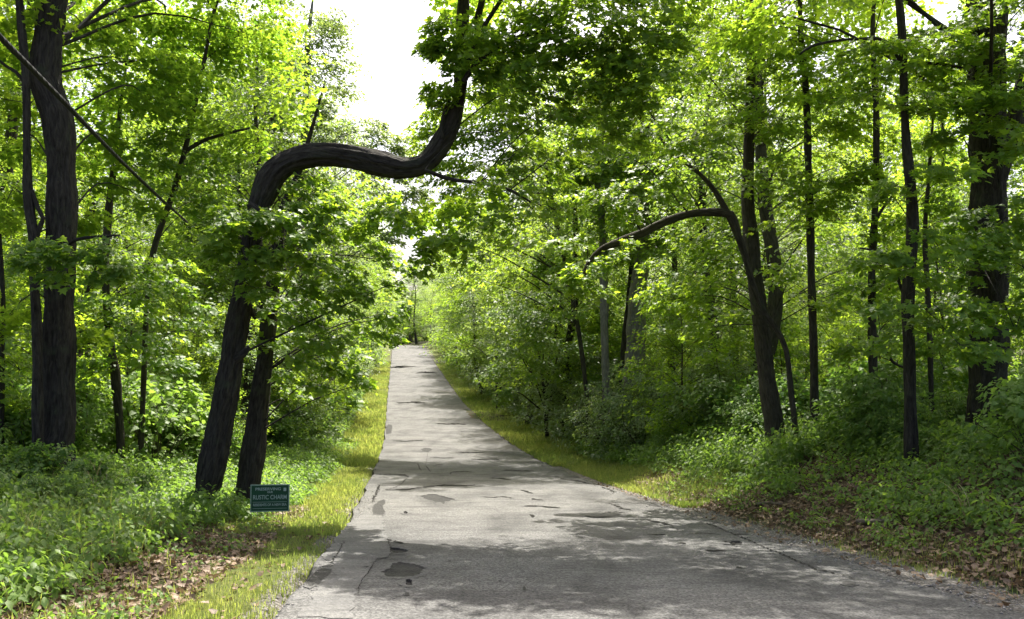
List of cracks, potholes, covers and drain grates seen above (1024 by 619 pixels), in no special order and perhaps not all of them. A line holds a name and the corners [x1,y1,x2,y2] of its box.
pothole [367,498,389,516]
pothole [416,493,459,503]
crack [372,423,560,517]
pothole [370,560,436,579]
